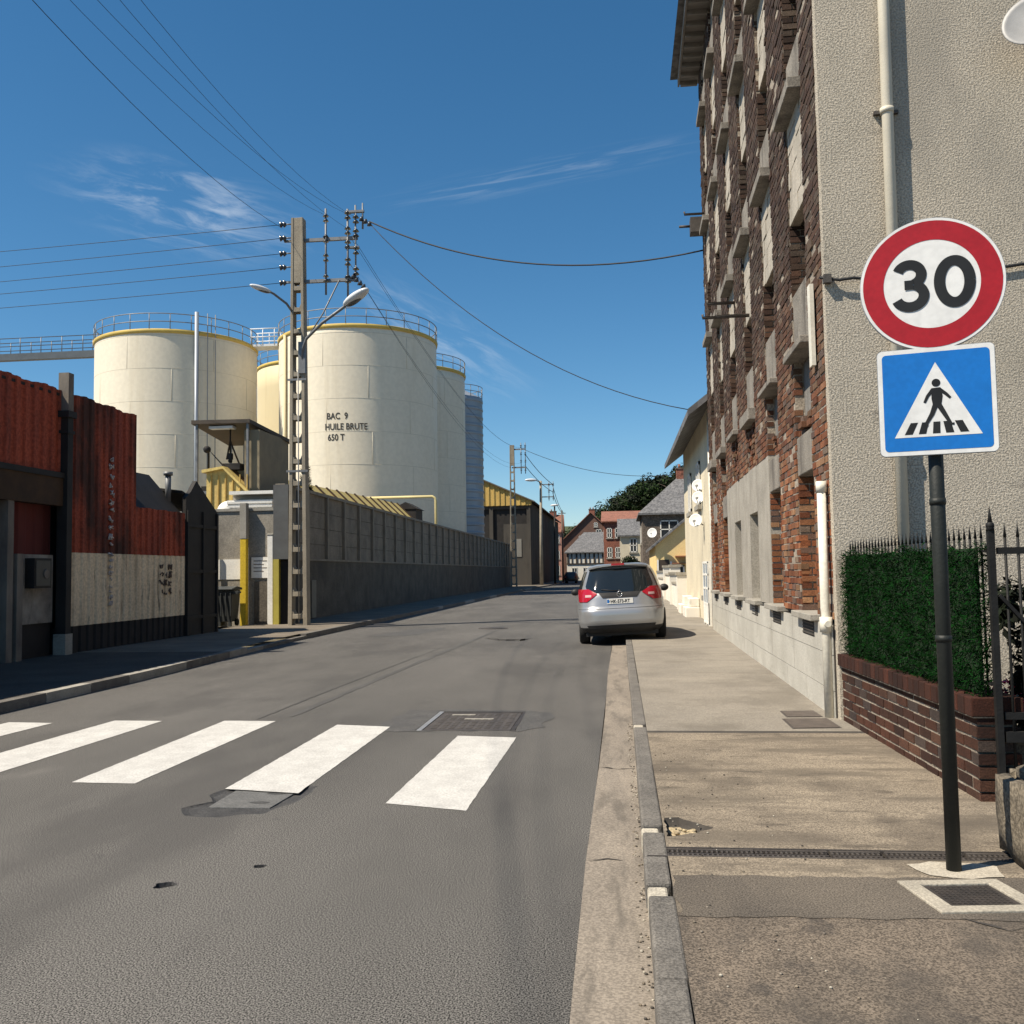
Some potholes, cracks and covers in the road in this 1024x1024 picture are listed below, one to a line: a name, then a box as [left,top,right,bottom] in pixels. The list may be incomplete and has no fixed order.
manhole cover [380,709,555,732]
manhole cover [782,718,842,729]
manhole cover [897,879,1024,914]
pothole [664,817,713,836]
